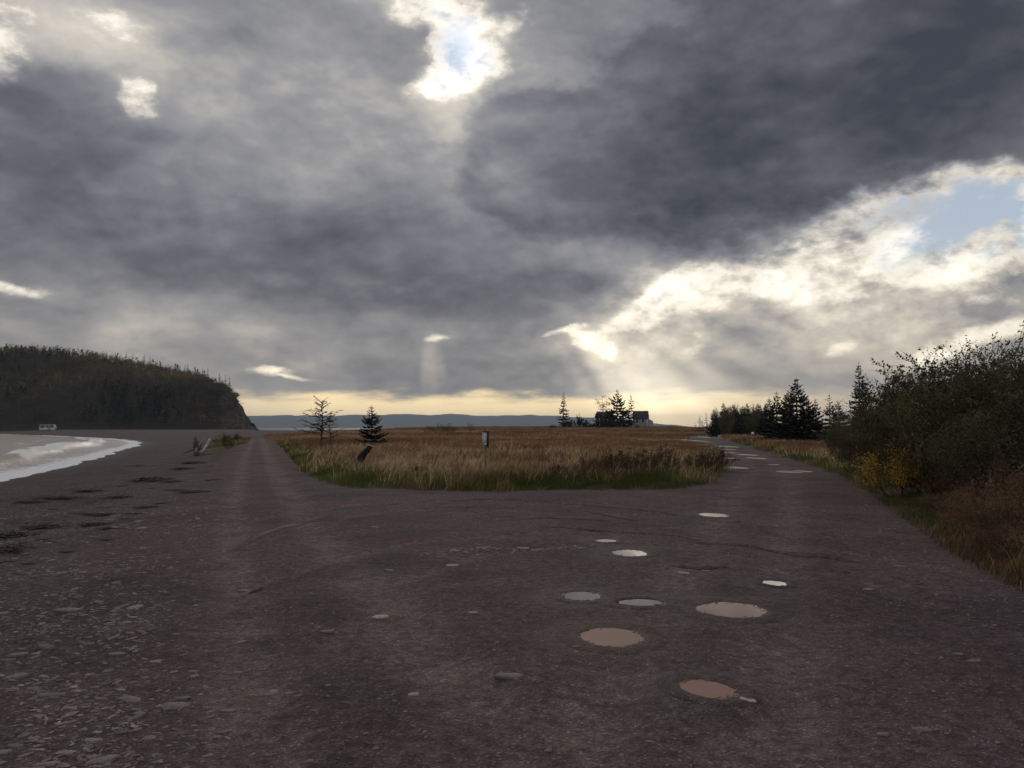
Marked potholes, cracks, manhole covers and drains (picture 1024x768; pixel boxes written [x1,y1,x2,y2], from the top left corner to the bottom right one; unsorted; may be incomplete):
pothole [546,588,617,604]
pothole [669,597,795,624]
pothole [688,511,741,519]
pothole [655,673,762,708]
pothole [557,621,668,655]
pothole [751,578,799,589]
pothole [598,547,661,559]
pothole [596,596,681,610]
